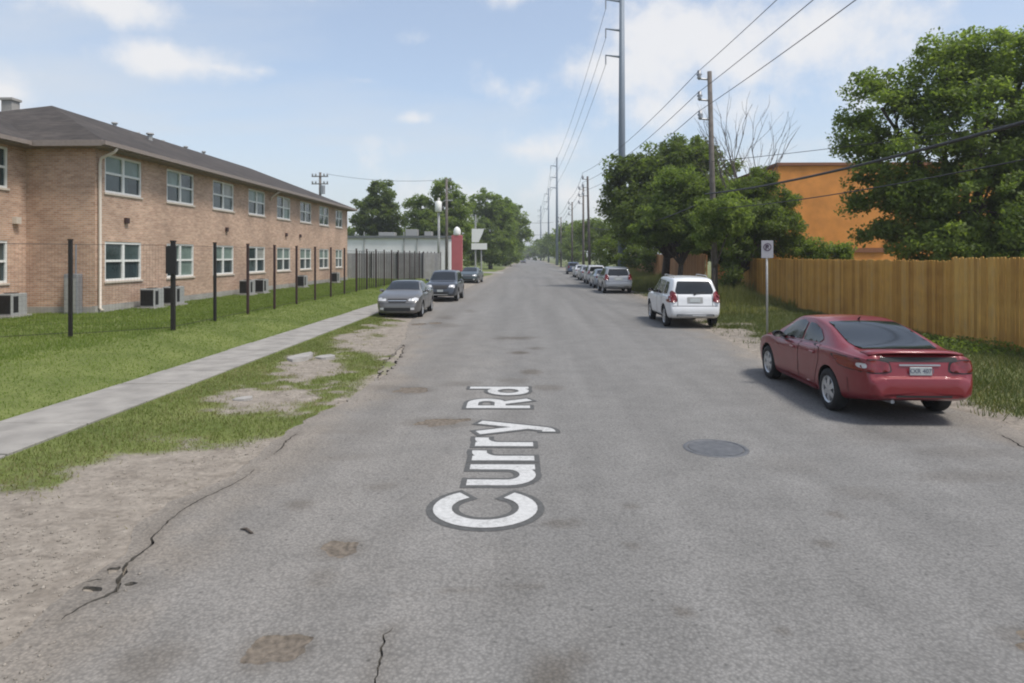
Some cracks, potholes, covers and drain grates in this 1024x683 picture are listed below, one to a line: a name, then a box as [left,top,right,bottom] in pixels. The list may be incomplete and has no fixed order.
manhole cover [683,439,750,458]
crack [377,345,404,380]
crack [62,470,254,619]
crack [374,629,392,683]
